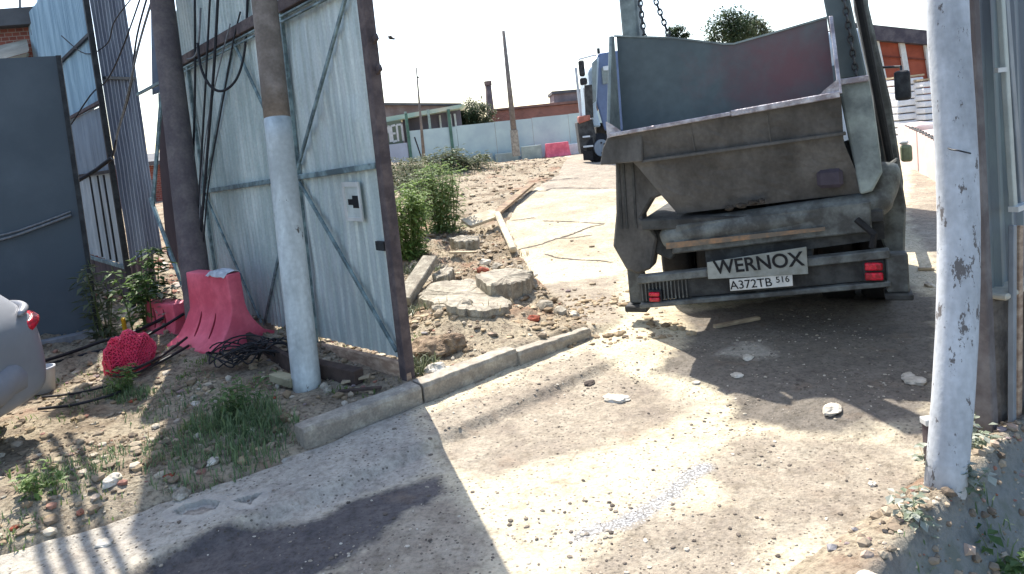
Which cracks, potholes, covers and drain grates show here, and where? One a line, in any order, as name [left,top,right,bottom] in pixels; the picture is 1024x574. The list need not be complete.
crack [518,224,608,262]
pothole [219,488,273,510]
pothole [161,493,232,523]
